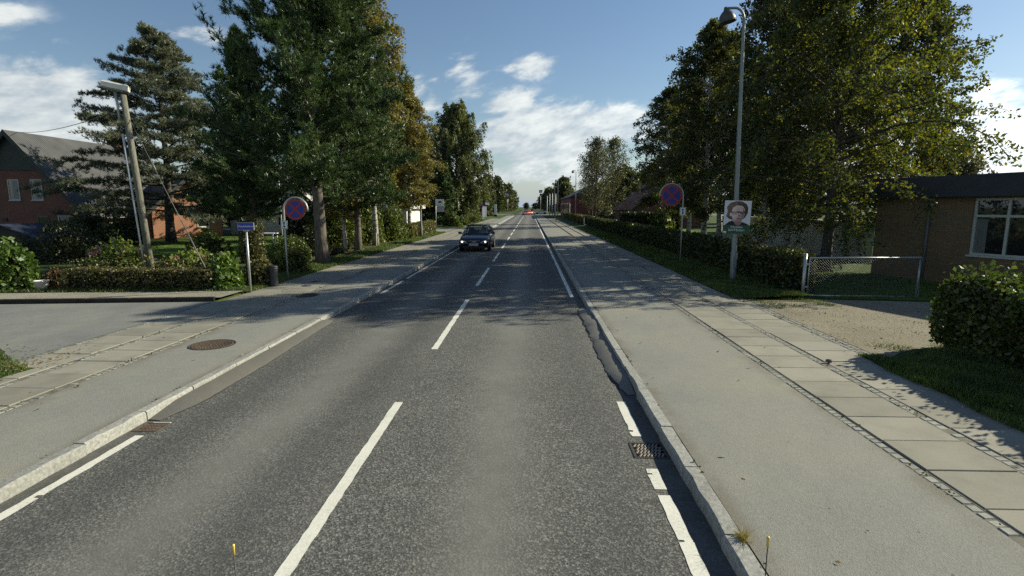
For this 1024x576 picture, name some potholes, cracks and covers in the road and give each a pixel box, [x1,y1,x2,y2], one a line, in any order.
manhole cover [187,339,237,350]
drain grate [628,442,671,459]
drain grate [131,422,172,432]
